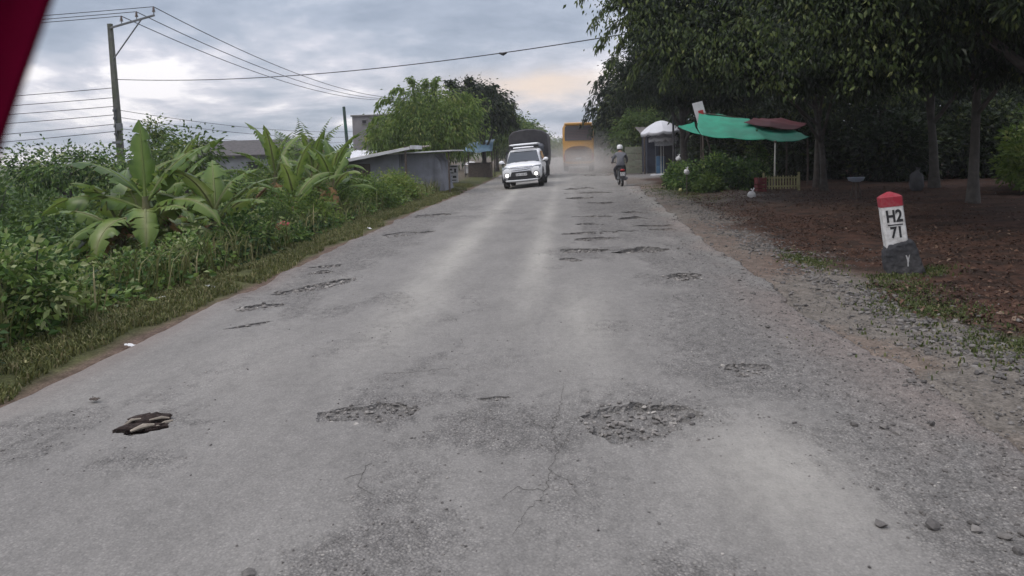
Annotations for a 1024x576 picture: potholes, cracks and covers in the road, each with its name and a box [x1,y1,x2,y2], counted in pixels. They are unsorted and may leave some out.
pothole [606,246,675,254]
pothole [717,361,782,380]
pothole [377,230,441,239]
pothole [228,301,290,313]
pothole [303,401,433,426]
pothole [259,277,361,297]
pothole [660,272,705,282]
crack [502,383,577,534]
pothole [211,319,283,332]
pothole [571,400,715,449]
